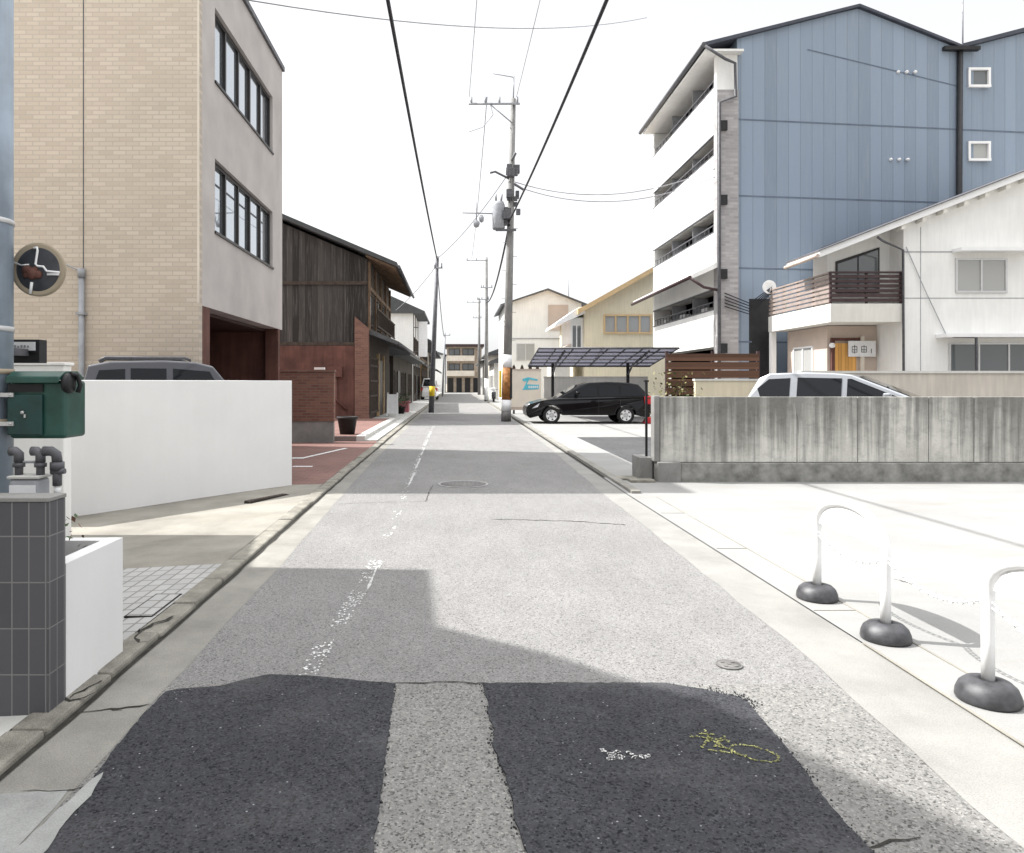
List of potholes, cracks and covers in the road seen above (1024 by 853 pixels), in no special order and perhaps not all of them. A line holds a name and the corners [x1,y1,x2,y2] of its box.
manhole cover [438,480,489,488]
crack [83,704,148,712]
drain grate [244,493,290,504]
utility cover [716,659,743,670]
utility cover [124,594,182,624]
crack [869,837,921,848]
